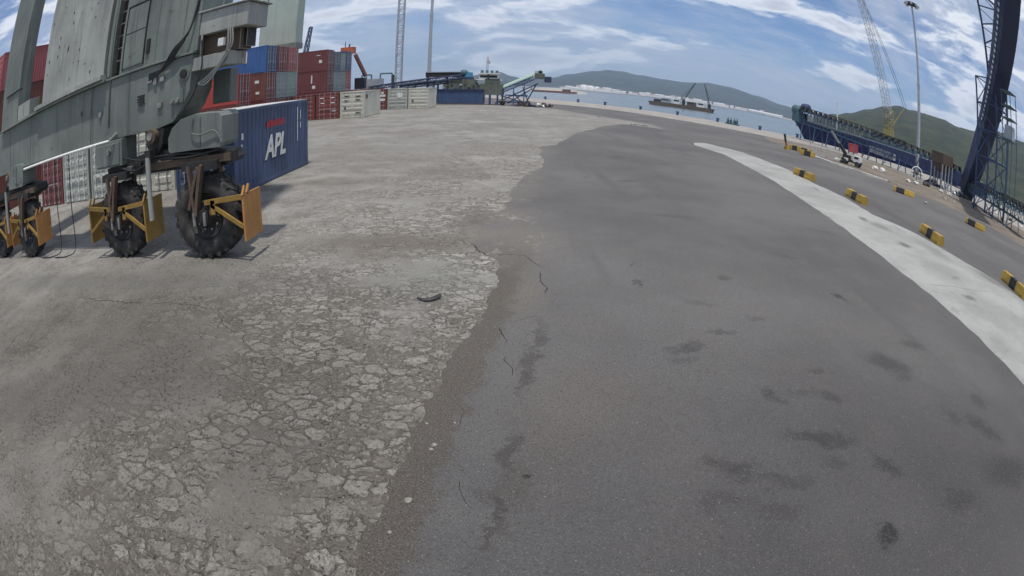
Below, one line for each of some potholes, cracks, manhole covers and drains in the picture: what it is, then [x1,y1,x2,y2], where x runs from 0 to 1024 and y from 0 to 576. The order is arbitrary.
crack [51,461,134,524]
